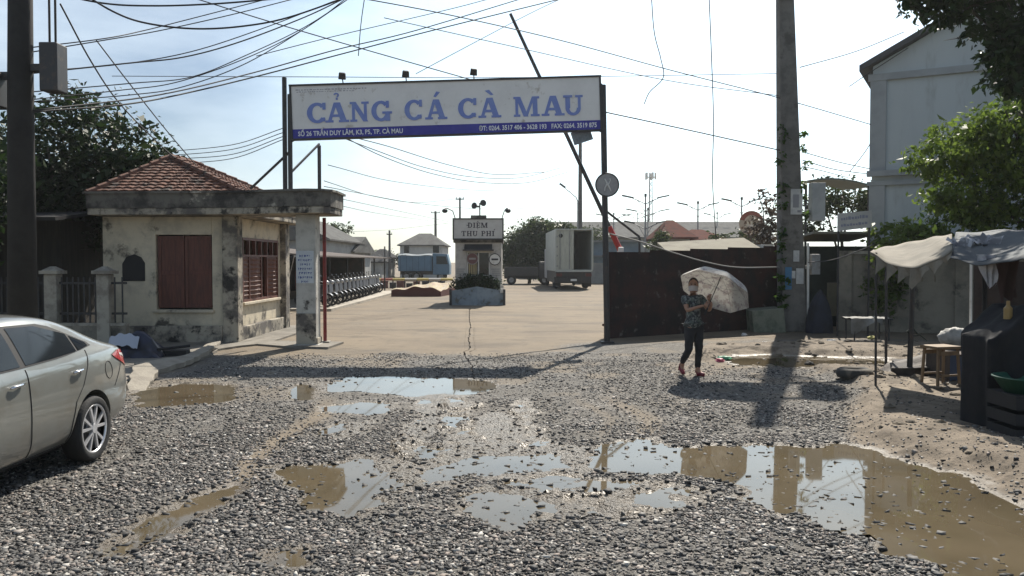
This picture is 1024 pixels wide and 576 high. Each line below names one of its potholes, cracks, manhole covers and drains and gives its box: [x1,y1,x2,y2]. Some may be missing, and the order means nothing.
pothole [498,472,724,520]
pothole [127,381,245,408]
pothole [407,439,600,485]
pothole [451,484,609,532]
pothole [309,375,500,400]
pothole [583,436,1024,575]
pothole [260,450,466,519]
crack [459,310,481,380]
